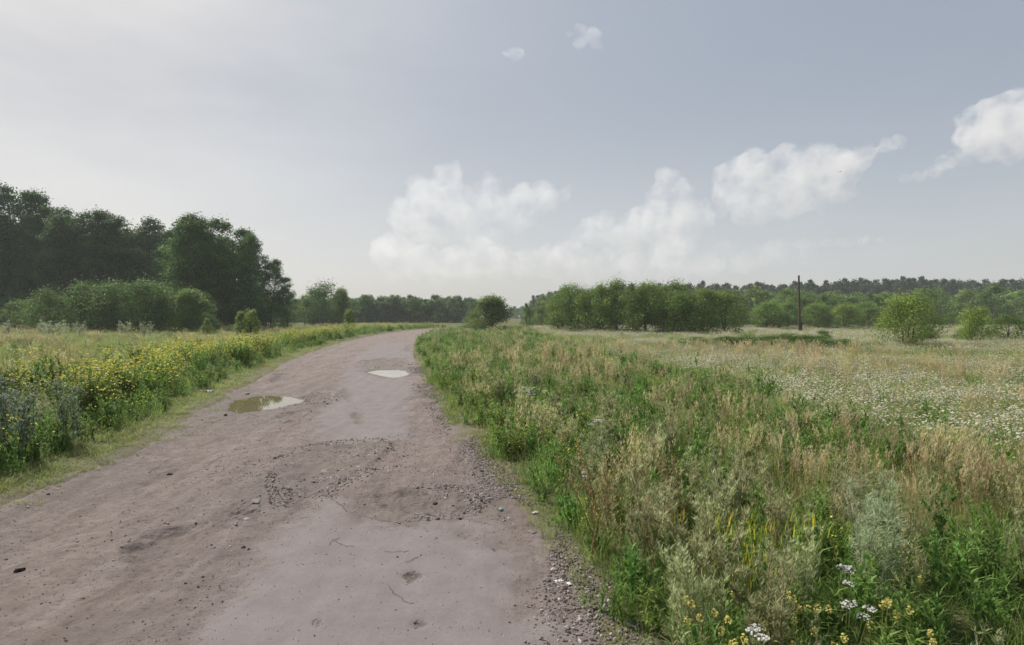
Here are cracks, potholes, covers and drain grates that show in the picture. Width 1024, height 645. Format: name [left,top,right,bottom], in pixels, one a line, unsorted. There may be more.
pothole [400,570,422,585]
pothole [272,439,388,498]
pothole [365,486,471,516]
crack [386,584,414,604]
pothole [364,369,411,378]
crack [384,550,419,562]
pothole [223,394,304,414]
crack [324,493,490,547]
